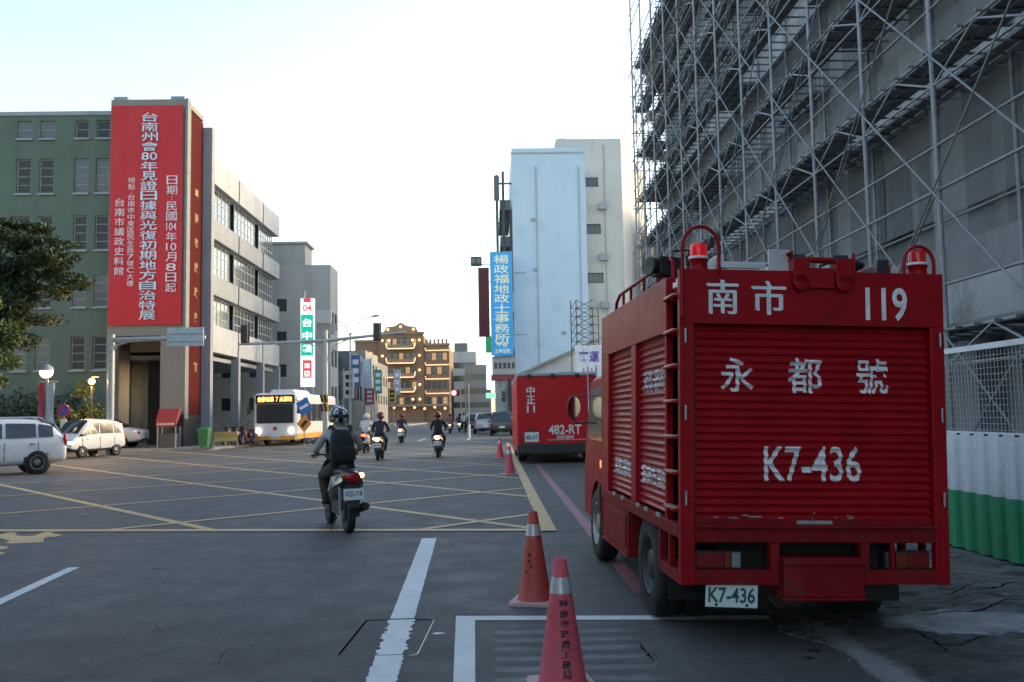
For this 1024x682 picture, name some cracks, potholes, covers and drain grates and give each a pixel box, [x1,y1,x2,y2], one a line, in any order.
manhole cover [336,619,434,656]
crack [639,643,657,661]
crack [911,580,1017,655]
